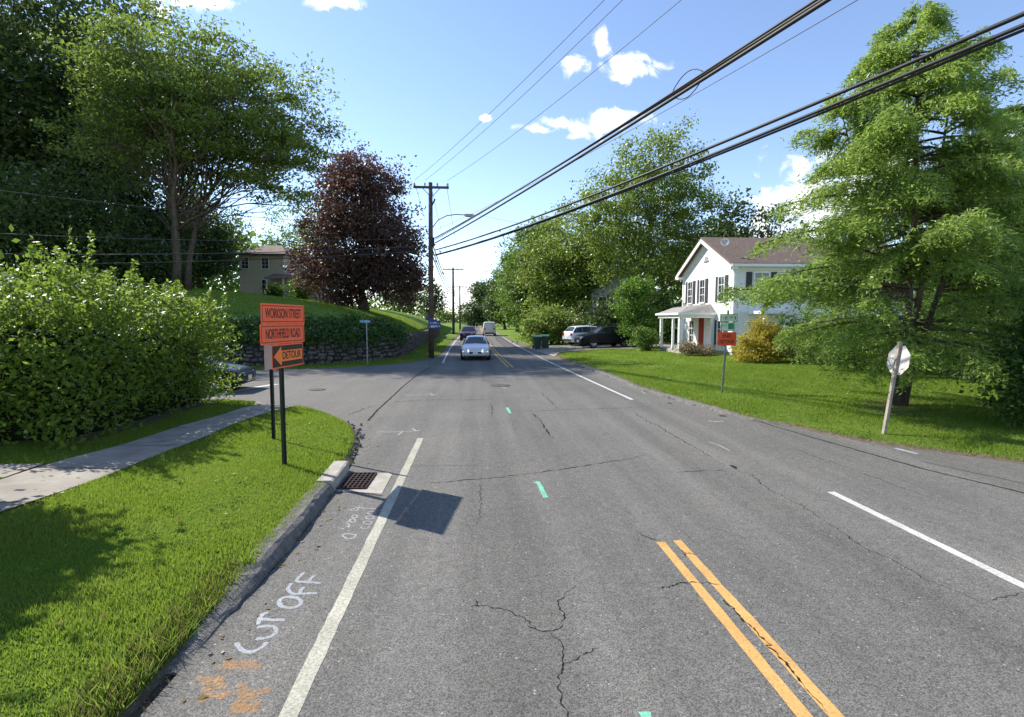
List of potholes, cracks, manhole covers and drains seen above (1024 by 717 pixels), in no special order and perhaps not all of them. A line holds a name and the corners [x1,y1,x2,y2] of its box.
drain grate [337,472,392,494]
crack [471,586,598,717]
crack [413,454,647,525]
crack [661,581,826,711]
crack [513,392,1024,626]
